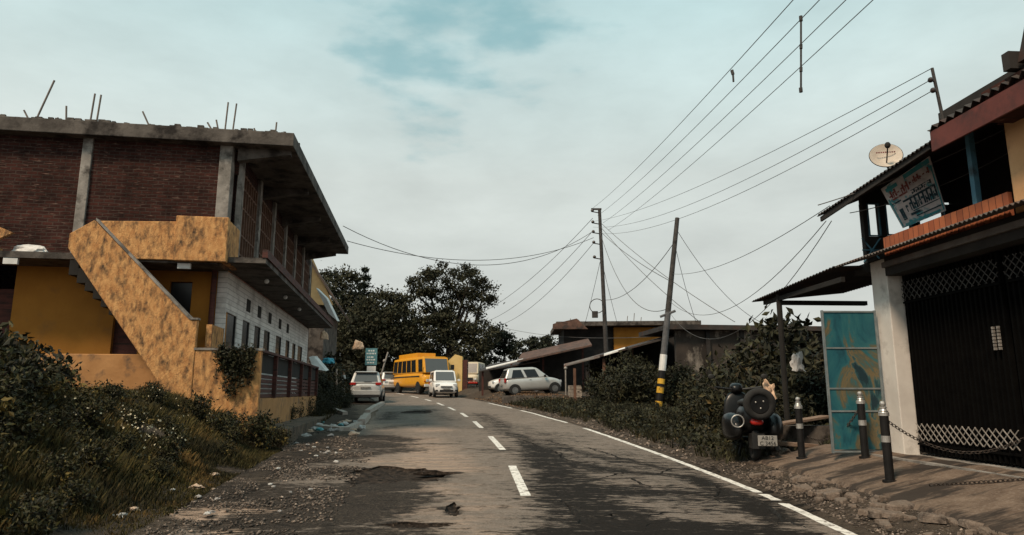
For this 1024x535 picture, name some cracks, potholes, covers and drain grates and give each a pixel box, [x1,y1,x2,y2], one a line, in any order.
pothole [344,466,455,485]
